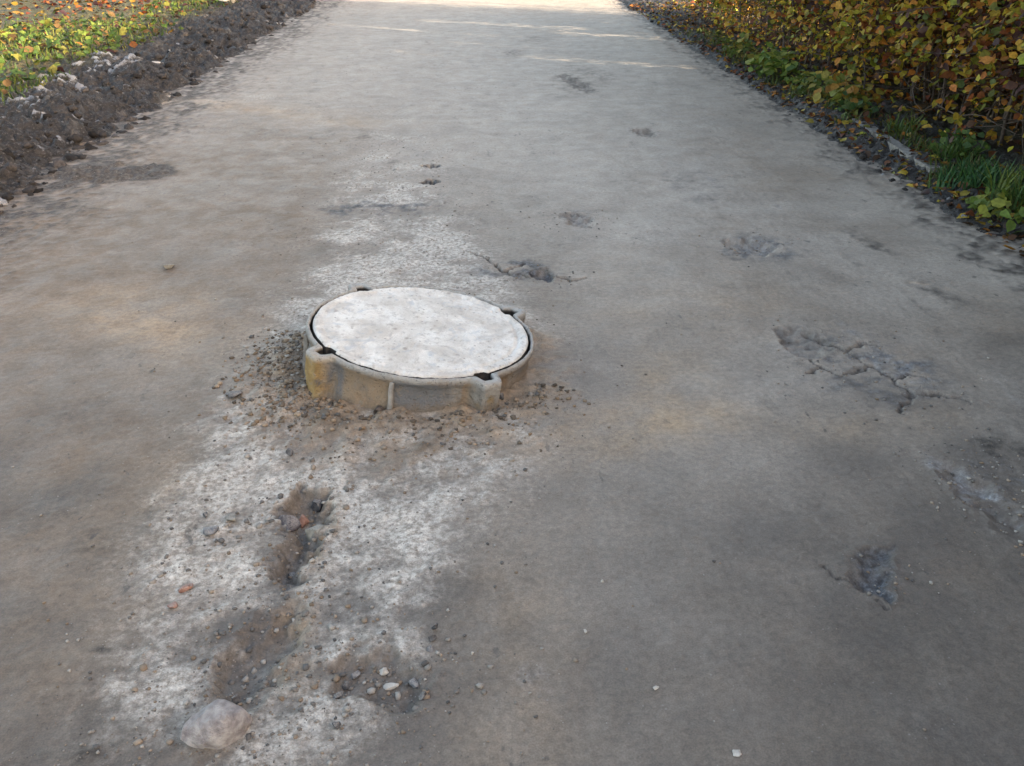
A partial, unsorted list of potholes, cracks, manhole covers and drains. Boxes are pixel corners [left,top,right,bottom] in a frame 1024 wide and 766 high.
pothole [528,267,559,283]
pothole [554,73,601,94]
pothole [317,641,440,716]
crack [803,339,973,415]
pothole [627,127,661,139]
pothole [720,236,784,258]
pothole [926,456,1024,539]
pothole [843,543,900,605]
